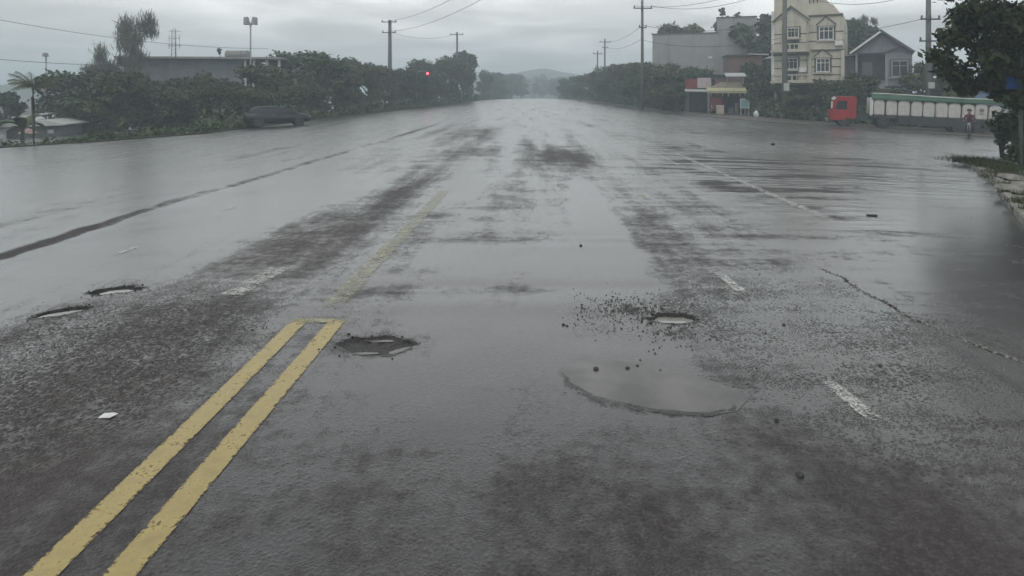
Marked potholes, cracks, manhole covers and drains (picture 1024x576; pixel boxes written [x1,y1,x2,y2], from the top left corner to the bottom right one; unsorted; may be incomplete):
pothole [26,304,96,321]
crack [818,269,1024,364]
pothole [636,308,701,325]
pothole [80,284,148,298]
pothole [318,333,420,359]
